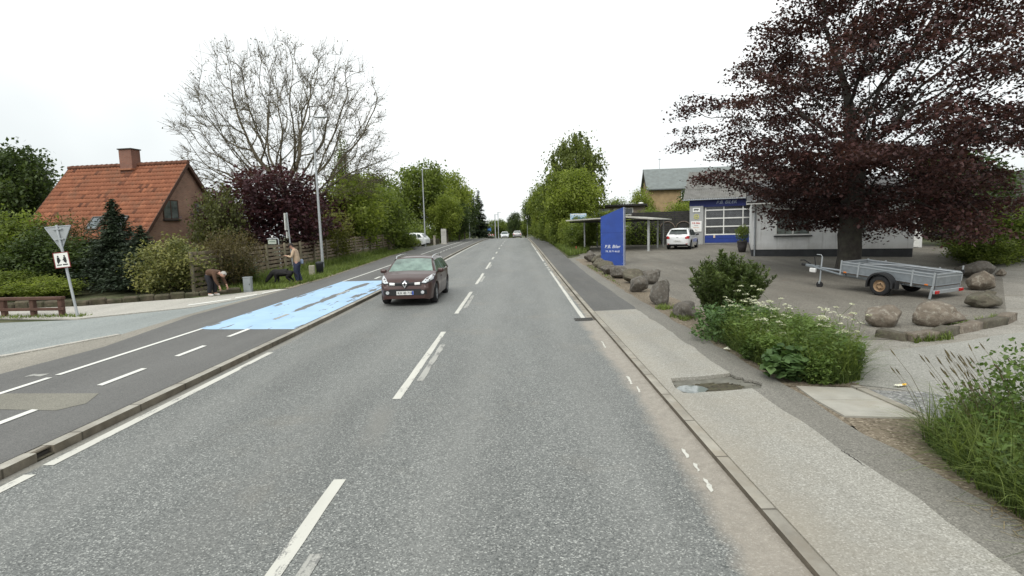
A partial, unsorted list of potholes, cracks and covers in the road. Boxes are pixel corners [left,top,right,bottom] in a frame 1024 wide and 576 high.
drain grate [32,446,54,461]
pothole [672,376,762,393]
